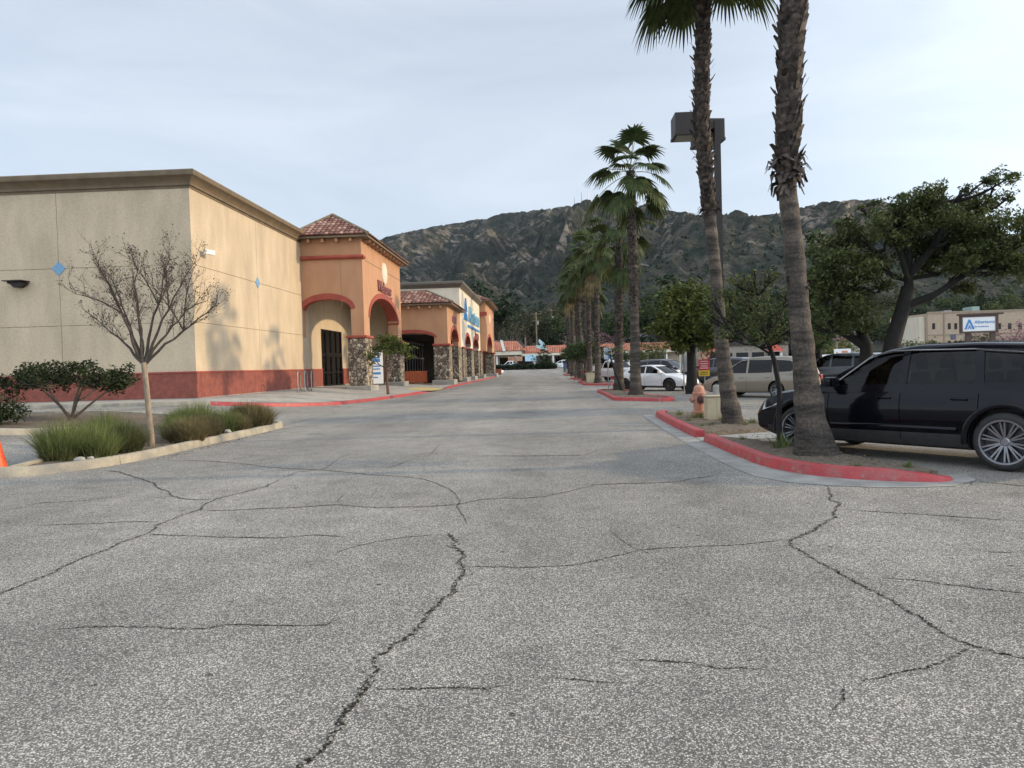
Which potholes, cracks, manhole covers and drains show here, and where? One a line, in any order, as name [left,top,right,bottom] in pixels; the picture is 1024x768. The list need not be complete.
crack [788,486,1024,717]
crack [0,417,781,768]
